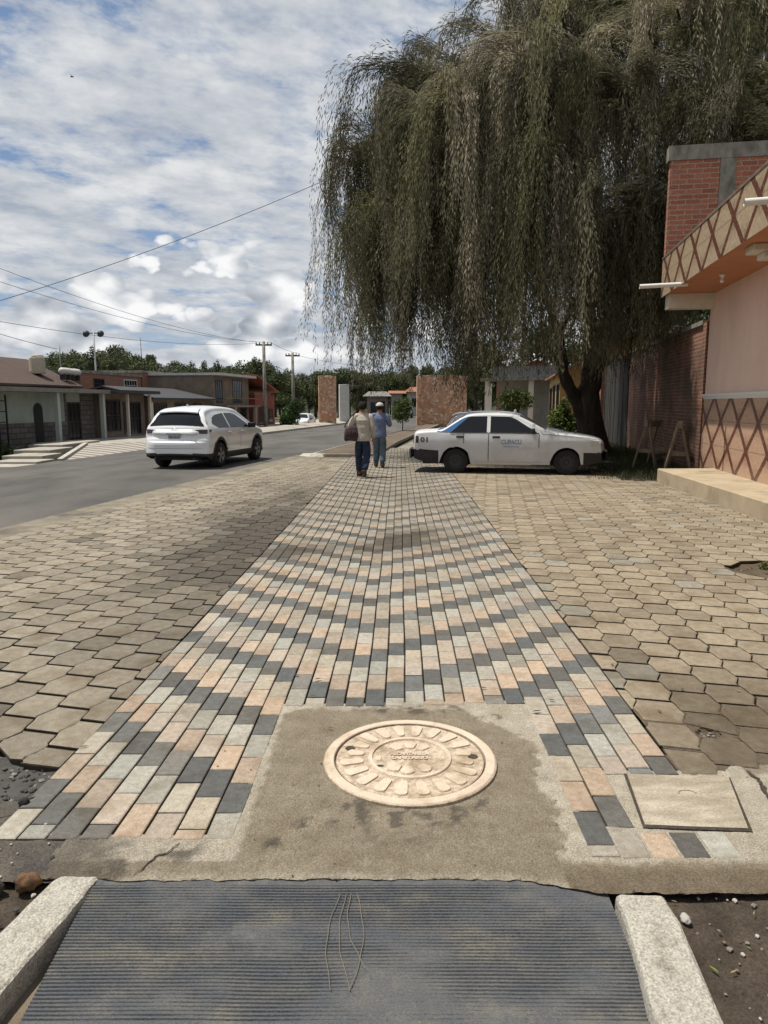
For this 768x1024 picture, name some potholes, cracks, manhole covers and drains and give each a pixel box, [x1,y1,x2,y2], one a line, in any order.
crack [133,842,180,876]
pothole [696,729,720,739]
utility cover [624,774,753,832]
manhole cover [323,720,497,809]
